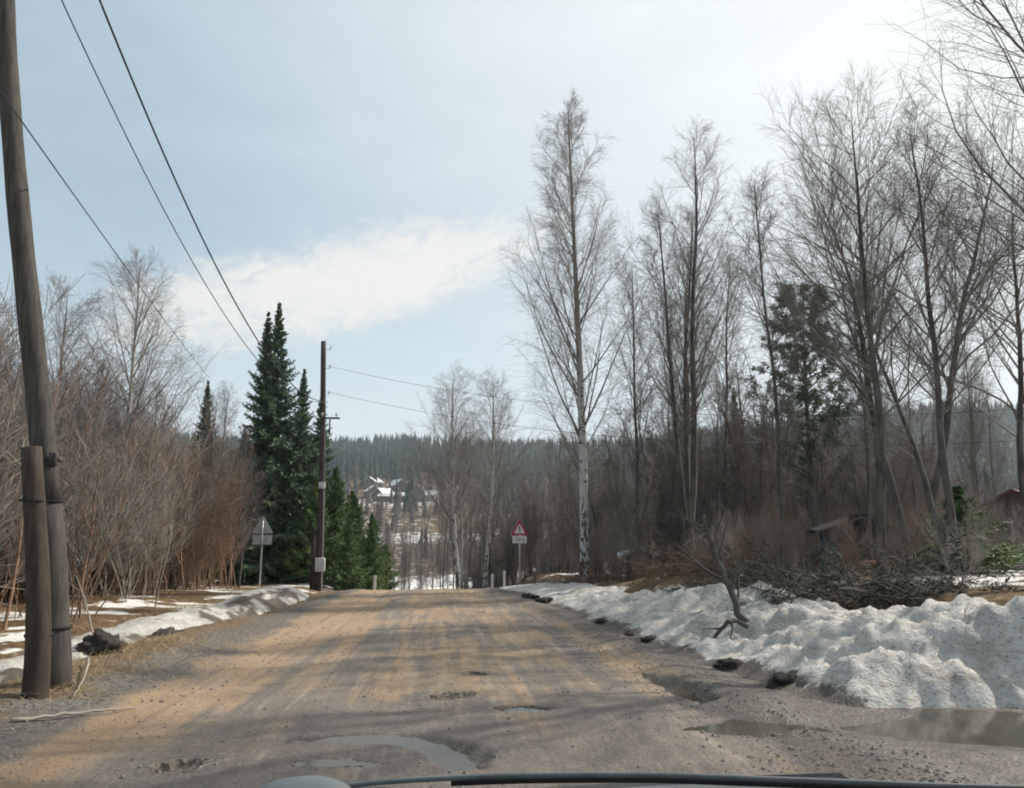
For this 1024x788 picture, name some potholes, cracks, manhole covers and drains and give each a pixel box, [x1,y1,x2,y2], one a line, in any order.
pothole [143,756,215,775]
pothole [415,690,485,701]
pothole [483,704,564,714]
